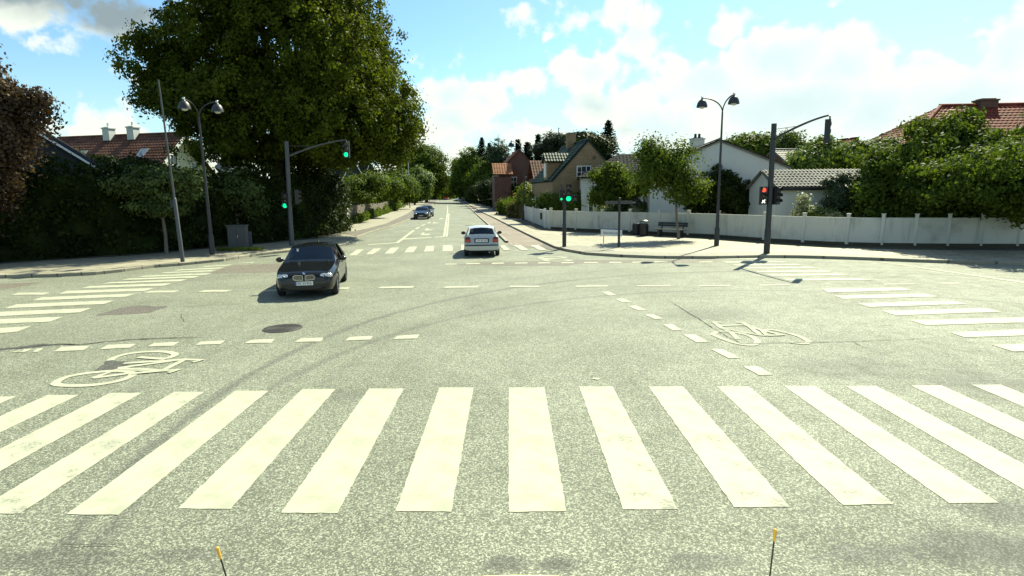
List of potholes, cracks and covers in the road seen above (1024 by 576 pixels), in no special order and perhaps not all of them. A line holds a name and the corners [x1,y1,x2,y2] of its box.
manhole cover [262,324,303,333]
